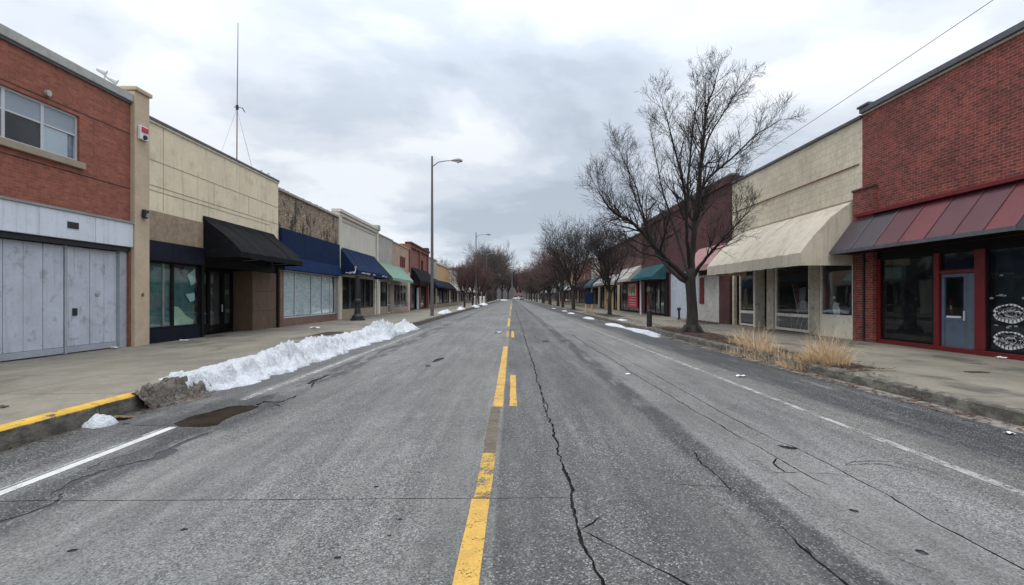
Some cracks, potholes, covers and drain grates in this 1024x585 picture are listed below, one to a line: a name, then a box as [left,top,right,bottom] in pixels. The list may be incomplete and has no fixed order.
crack [0,312,689,585]
crack [578,339,1024,585]
